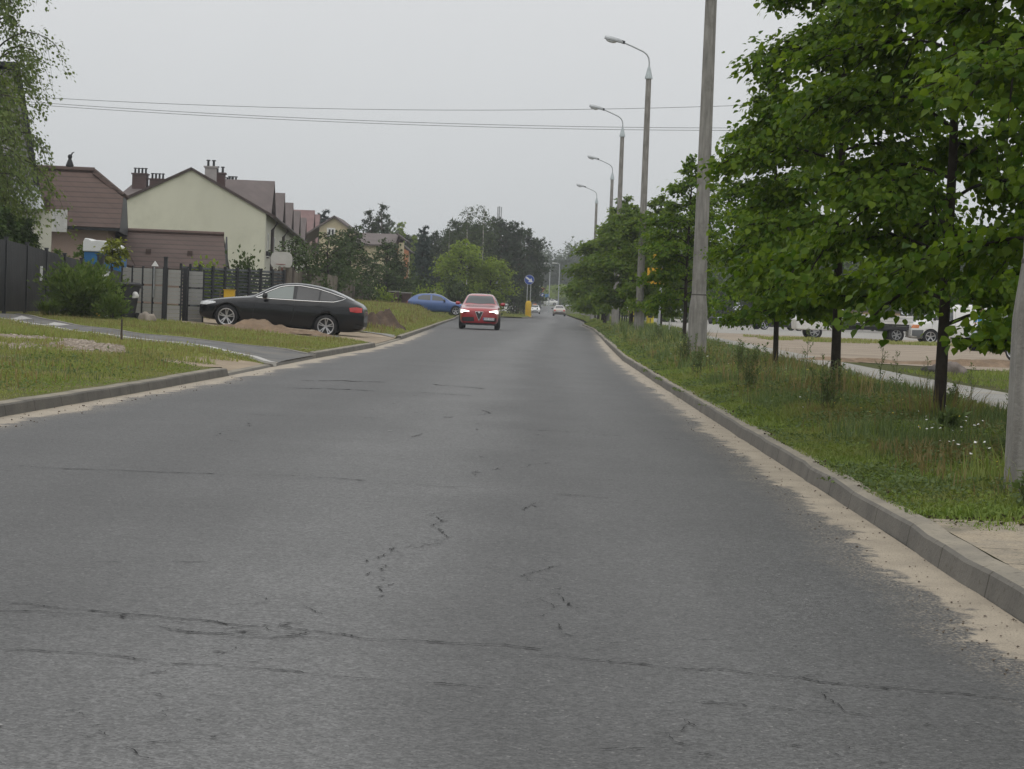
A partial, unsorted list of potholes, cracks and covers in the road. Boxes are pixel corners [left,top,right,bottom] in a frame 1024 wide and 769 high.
crack [520,559,614,643]
crack [5,456,600,597]
crack [15,603,1023,758]
